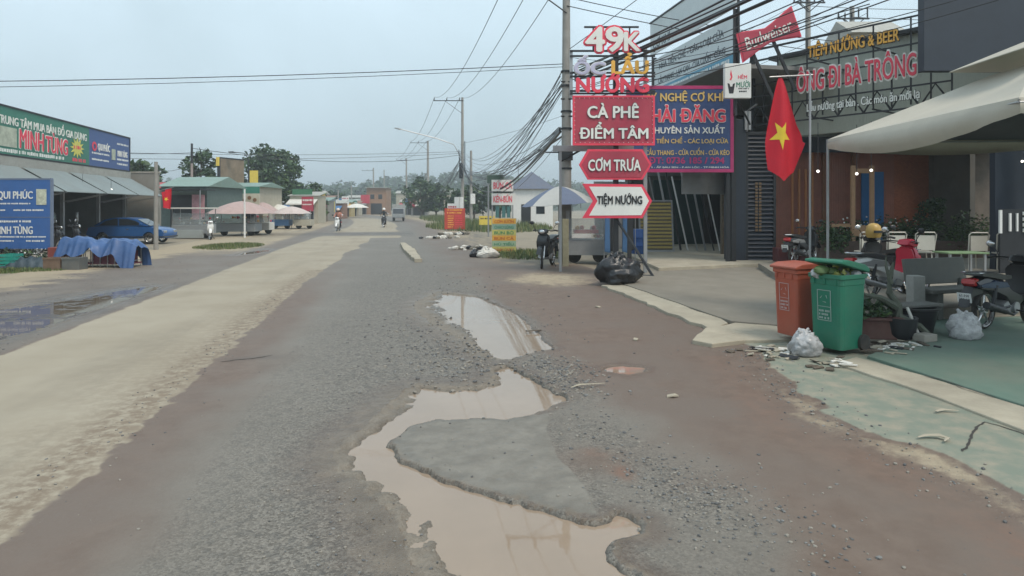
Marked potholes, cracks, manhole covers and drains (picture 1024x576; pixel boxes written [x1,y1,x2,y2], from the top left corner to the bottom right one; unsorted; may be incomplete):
crack [961,421,1023,451]
pothole [414,291,556,360]
pothole [331,364,647,576]
